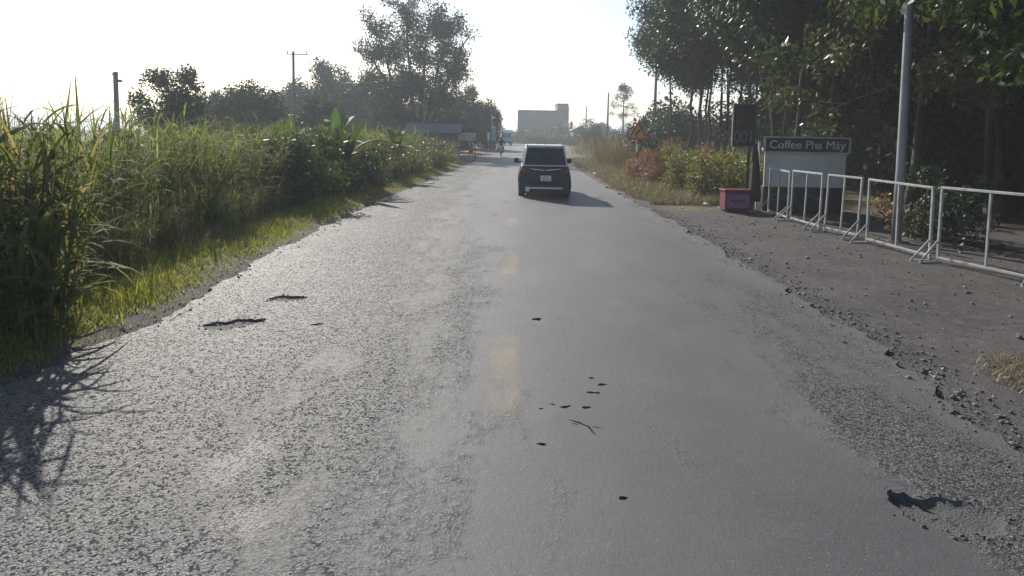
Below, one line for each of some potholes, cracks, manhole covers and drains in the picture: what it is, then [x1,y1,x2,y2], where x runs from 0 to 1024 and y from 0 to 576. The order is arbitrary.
pothole [267,294,311,302]
pothole [197,317,267,330]
